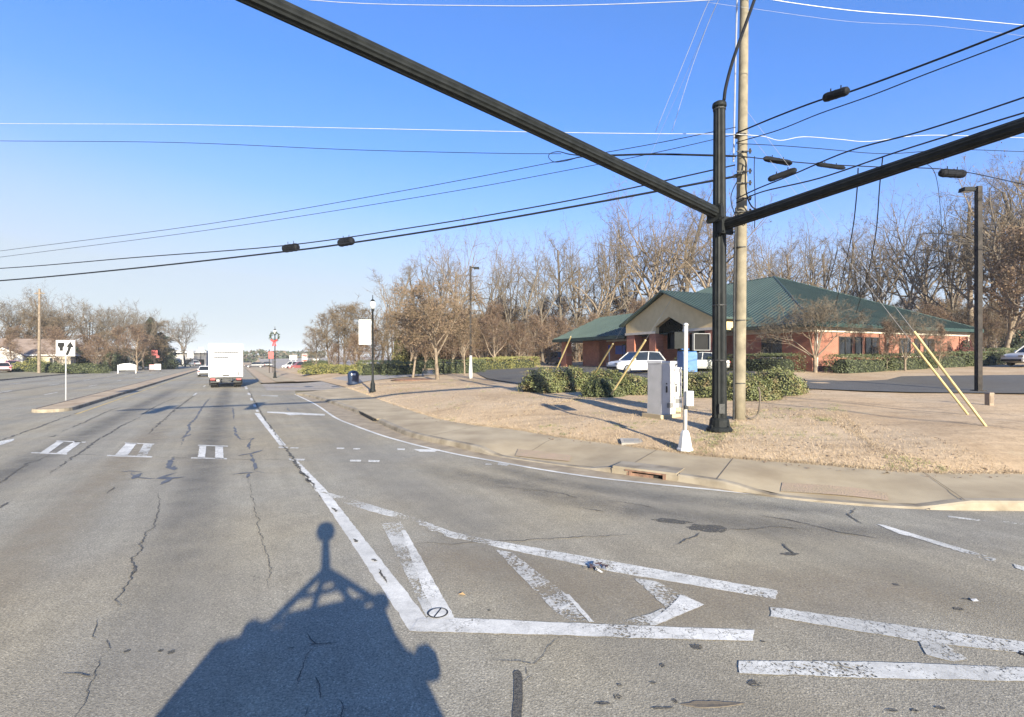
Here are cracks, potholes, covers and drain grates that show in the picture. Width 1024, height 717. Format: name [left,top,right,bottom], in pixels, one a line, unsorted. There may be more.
crack [248,482,272,584]
crack [746,508,875,553]
crack [63,620,111,716]
crack [114,497,161,606]
crack [291,633,337,715]
drain grate [612,461,684,481]
